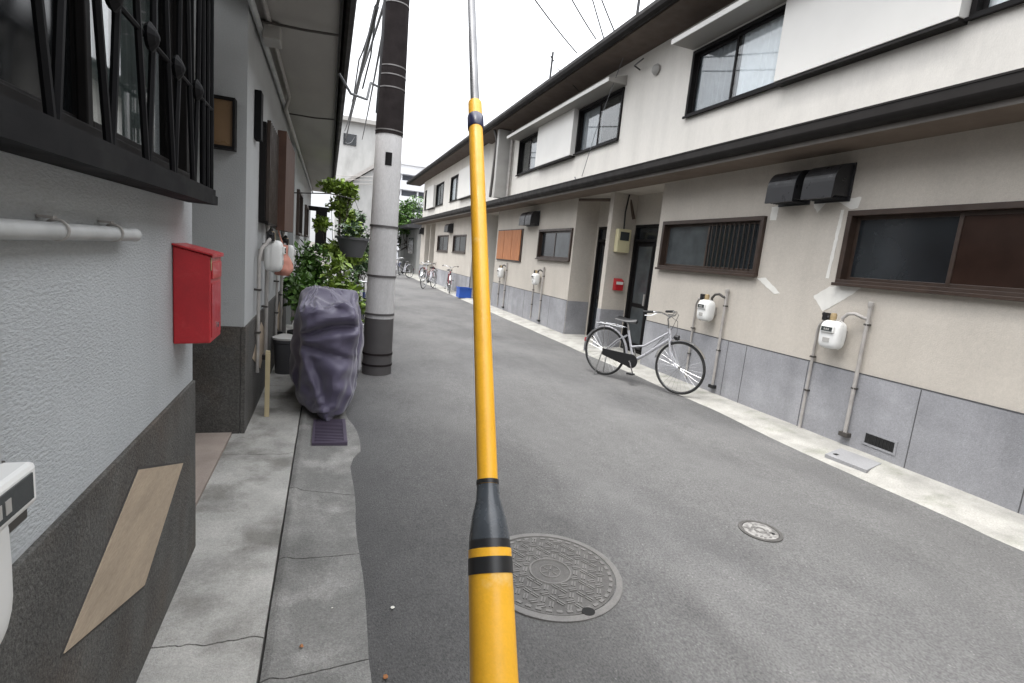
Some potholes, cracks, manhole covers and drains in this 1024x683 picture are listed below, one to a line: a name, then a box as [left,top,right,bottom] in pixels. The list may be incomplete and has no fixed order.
manhole cover [738,520,783,543]
manhole cover [510,533,623,623]
drain grate [312,419,348,446]
